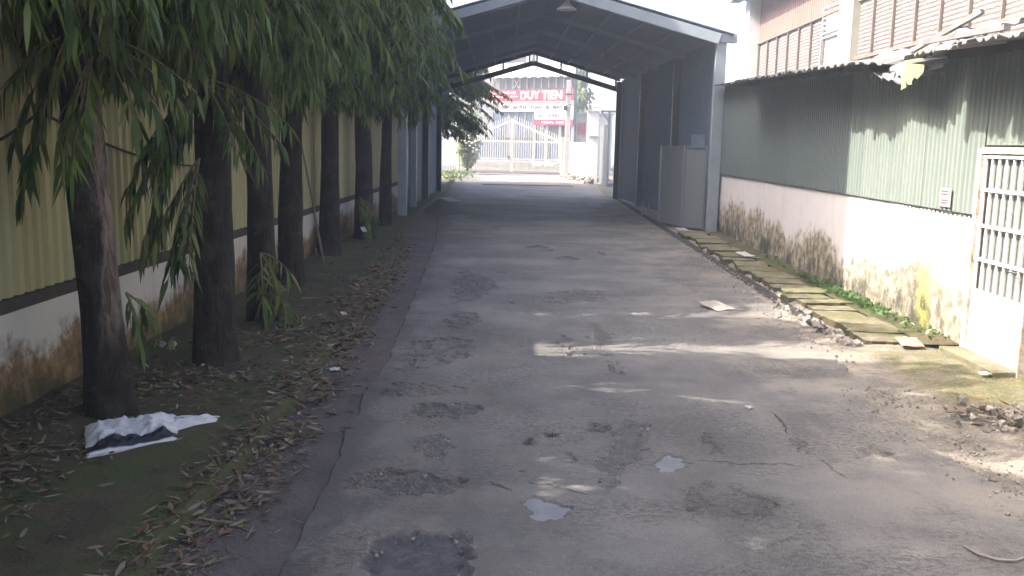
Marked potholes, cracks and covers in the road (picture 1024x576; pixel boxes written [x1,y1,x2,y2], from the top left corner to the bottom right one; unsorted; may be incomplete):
crack [699,460,803,468]
pothole [351,528,479,576]
crack [769,410,788,434]
crack [820,459,847,478]
pothole [517,495,575,522]
pothole [650,453,695,474]
